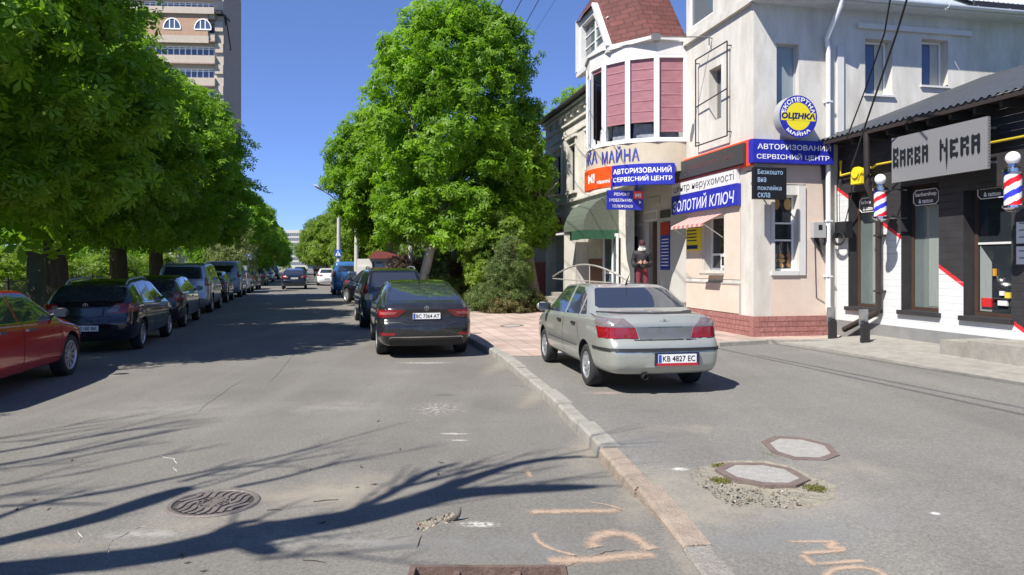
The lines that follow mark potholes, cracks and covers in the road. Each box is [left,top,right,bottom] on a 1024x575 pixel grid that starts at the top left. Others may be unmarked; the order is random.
manhole cover [762,436,840,461]
manhole cover [715,462,810,489]
drain grate [407,565,567,575]
manhole cover [165,489,261,518]
pothole [690,460,837,509]
